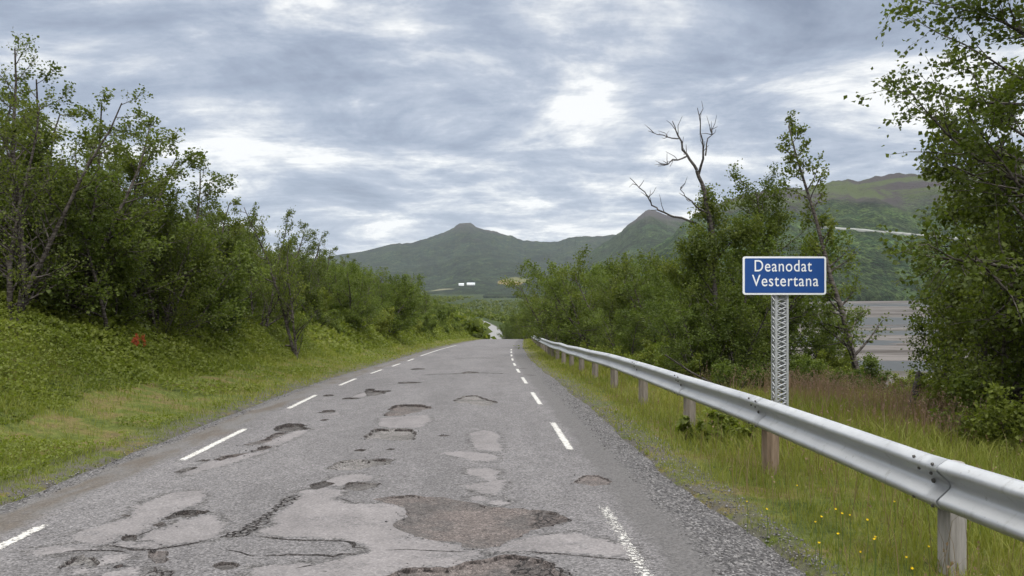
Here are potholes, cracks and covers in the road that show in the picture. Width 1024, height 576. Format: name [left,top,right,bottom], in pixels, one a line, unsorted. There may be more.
pothole [309,481,335,490]
pothole [387,554,567,576]
pothole [213,446,273,461]
pothole [573,475,612,486]
pothole [273,423,311,432]
pothole [374,495,568,549]
crack [65,495,366,576]
pothole [363,428,417,441]
pothole [383,404,432,416]
pothole [453,395,498,406]
